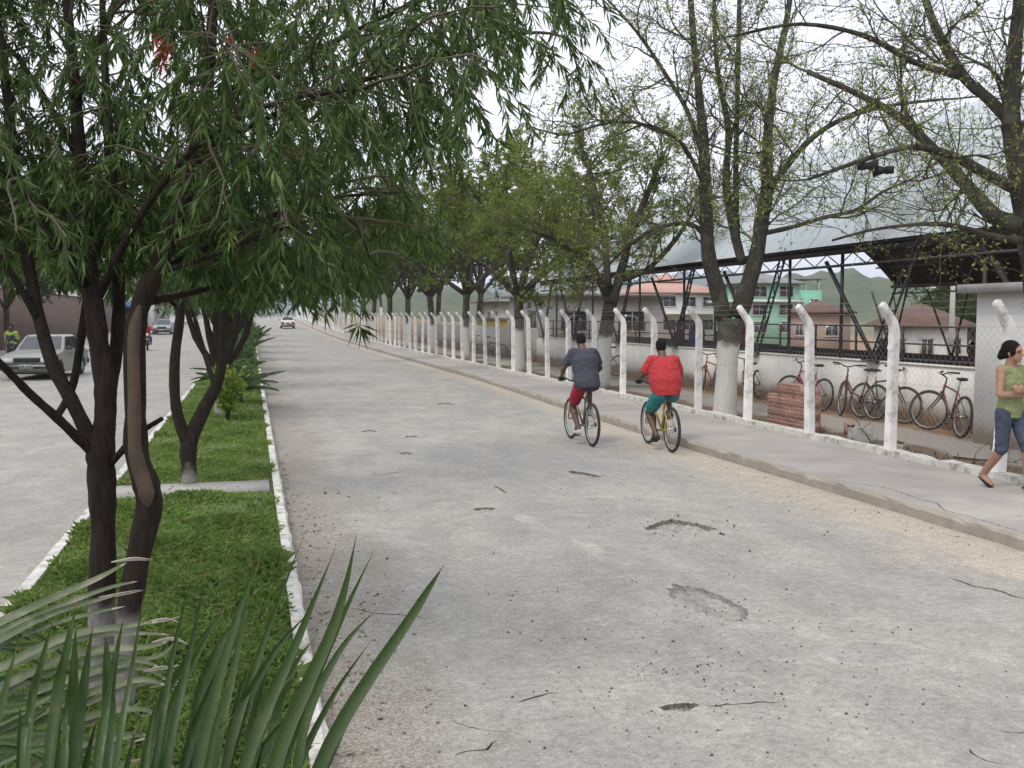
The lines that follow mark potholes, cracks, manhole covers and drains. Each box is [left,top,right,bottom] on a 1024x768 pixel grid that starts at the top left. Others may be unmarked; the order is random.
pothole [659,702,699,711]
crack [520,692,552,702]
crack [453,720,518,756]
pothole [645,519,717,533]
pothole [667,583,748,622]
crack [950,577,1024,599]
